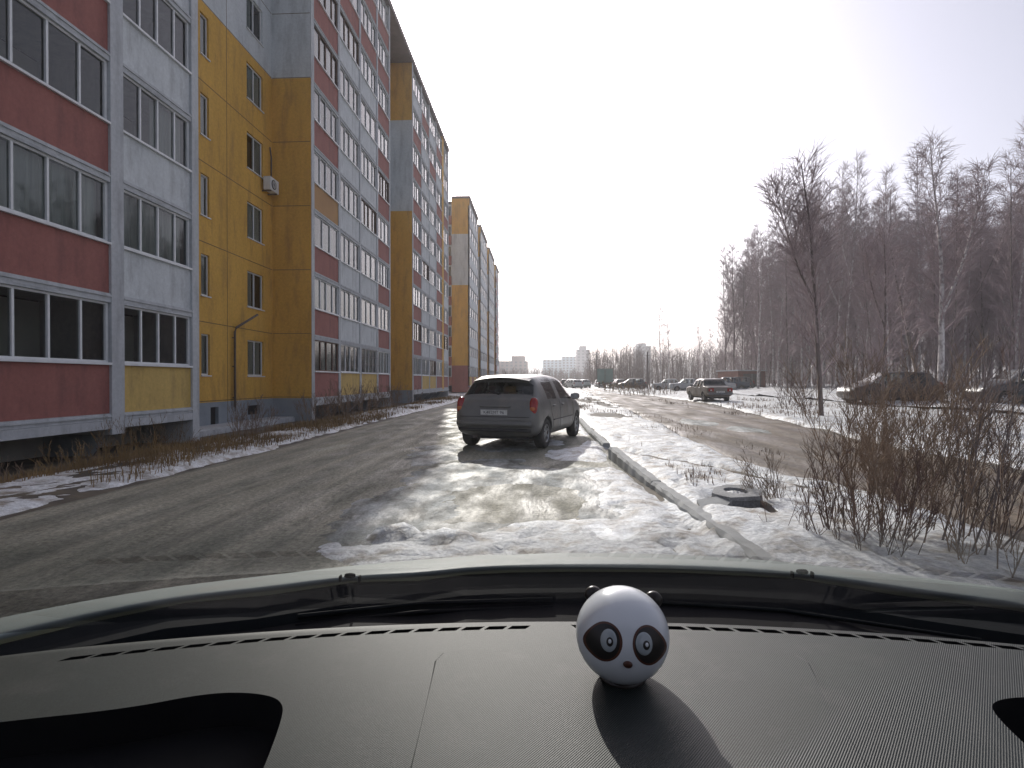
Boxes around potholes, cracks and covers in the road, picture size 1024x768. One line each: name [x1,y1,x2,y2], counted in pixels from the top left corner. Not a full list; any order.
manhole cover [712,484,762,508]
